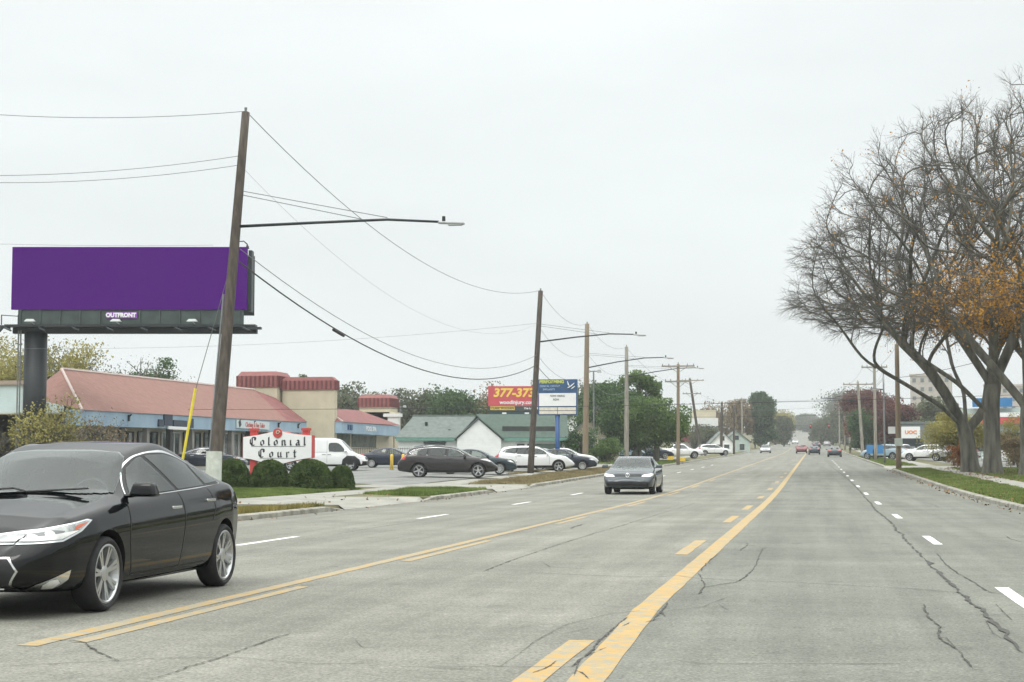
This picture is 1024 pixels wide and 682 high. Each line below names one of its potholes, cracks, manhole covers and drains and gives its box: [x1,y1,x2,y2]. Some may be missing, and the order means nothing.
crack [0,467,1022,679]
